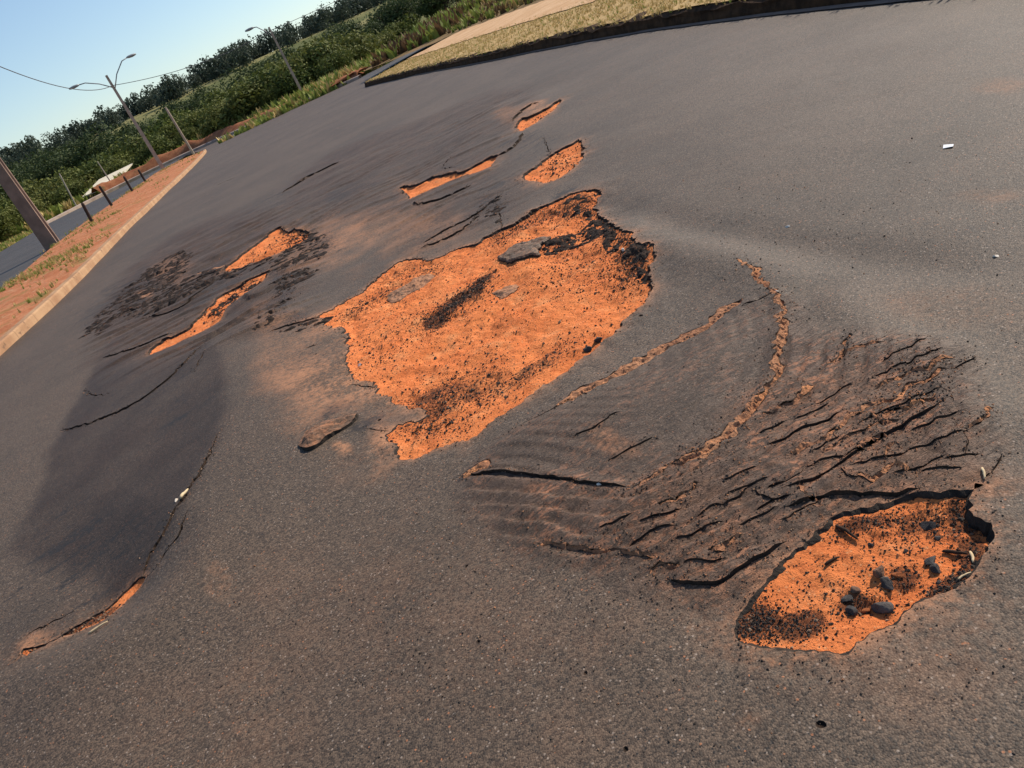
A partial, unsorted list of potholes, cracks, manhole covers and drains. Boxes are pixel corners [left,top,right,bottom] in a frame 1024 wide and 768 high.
pothole [318,189,657,460]
crack [61,265,251,431]
pothole [223,226,310,271]
crack [142,432,219,578]
crack [461,258,1002,585]
pothole [148,270,270,355]
crack [413,185,503,247]
pothole [399,154,498,199]
pothole [515,99,562,131]
crack [271,317,318,348]
pothole [522,139,585,183]
pothole [734,483,995,656]
